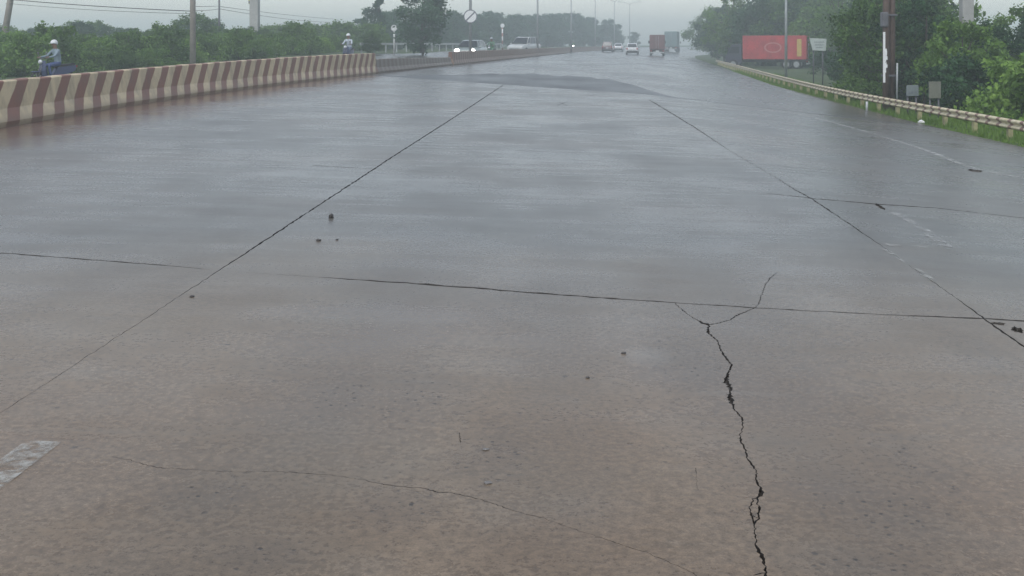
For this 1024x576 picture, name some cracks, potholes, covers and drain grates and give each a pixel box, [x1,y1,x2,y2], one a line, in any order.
crack [116,457,697,576]
crack [675,274,775,576]
